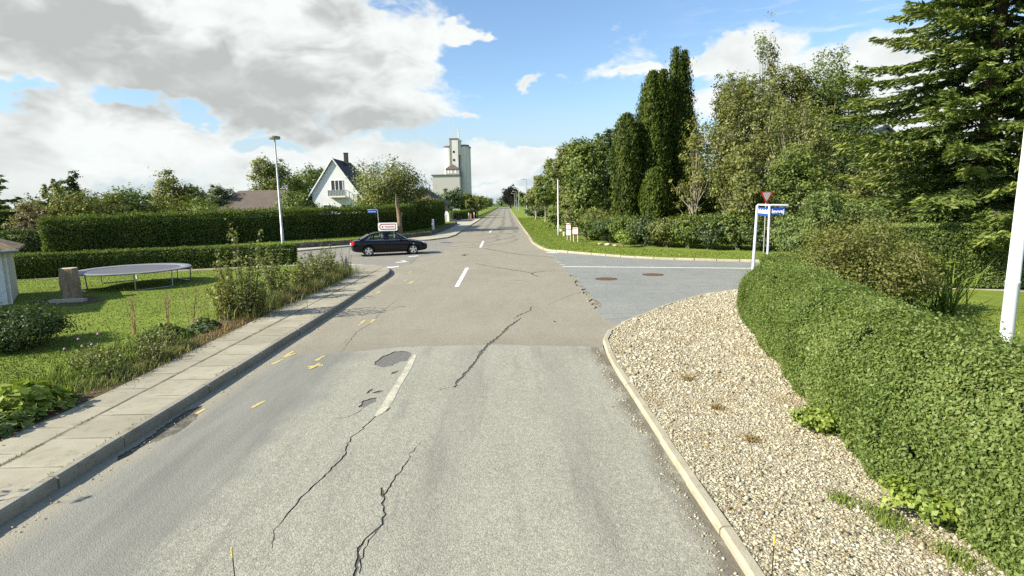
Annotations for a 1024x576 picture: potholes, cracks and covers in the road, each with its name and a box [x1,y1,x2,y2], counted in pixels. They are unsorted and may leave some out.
pothole [375,351,412,368]
crack [440,292,580,390]
pothole [117,405,204,461]
crack [272,407,420,576]
